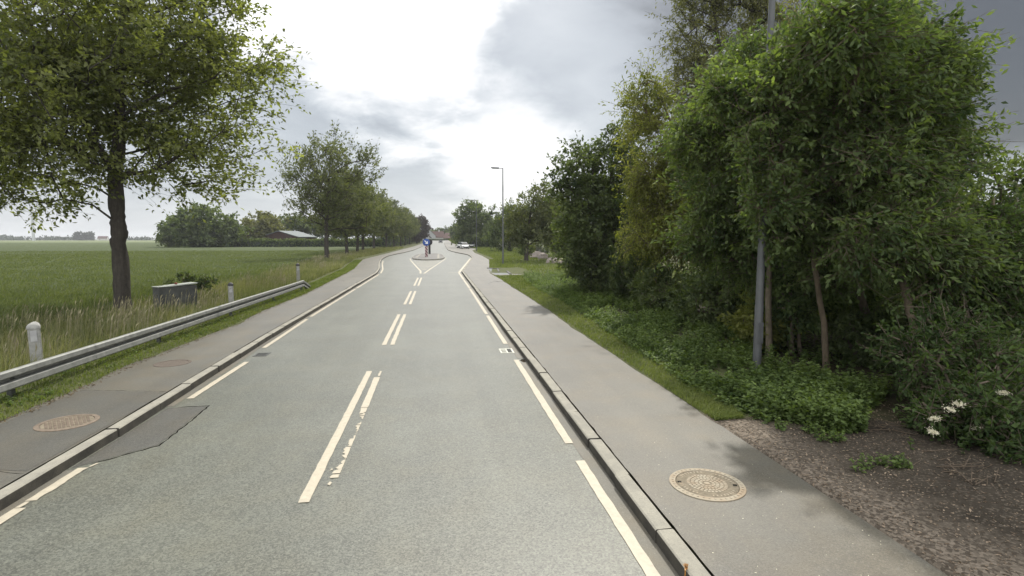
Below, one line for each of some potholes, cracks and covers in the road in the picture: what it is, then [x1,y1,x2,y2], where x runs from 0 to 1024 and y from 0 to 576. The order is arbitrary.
manhole cover [669,468,747,502]
manhole cover [33,414,100,432]
manhole cover [153,359,192,367]
